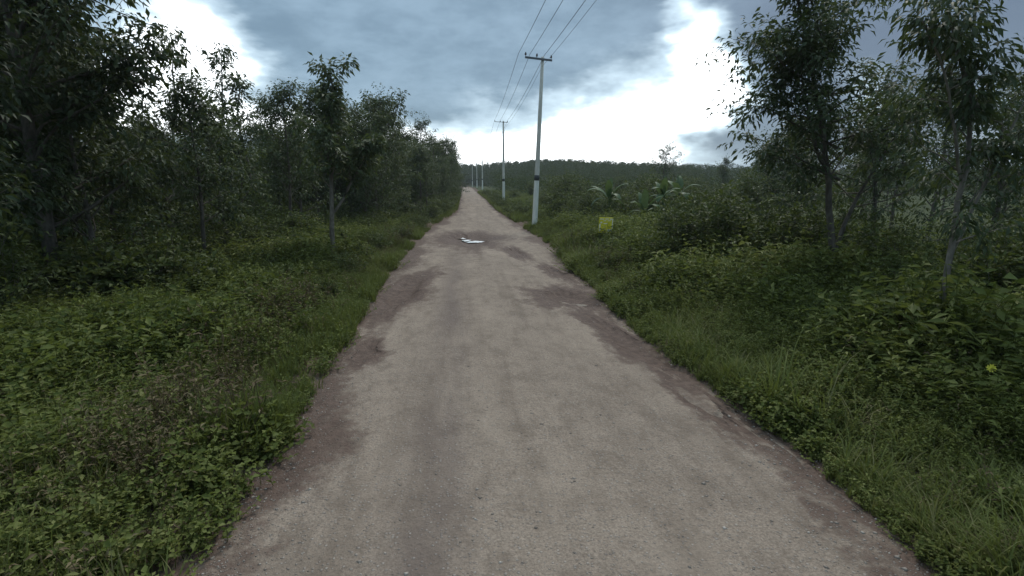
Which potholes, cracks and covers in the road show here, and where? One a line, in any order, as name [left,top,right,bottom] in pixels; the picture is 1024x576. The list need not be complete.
pothole [429,231,511,252]
